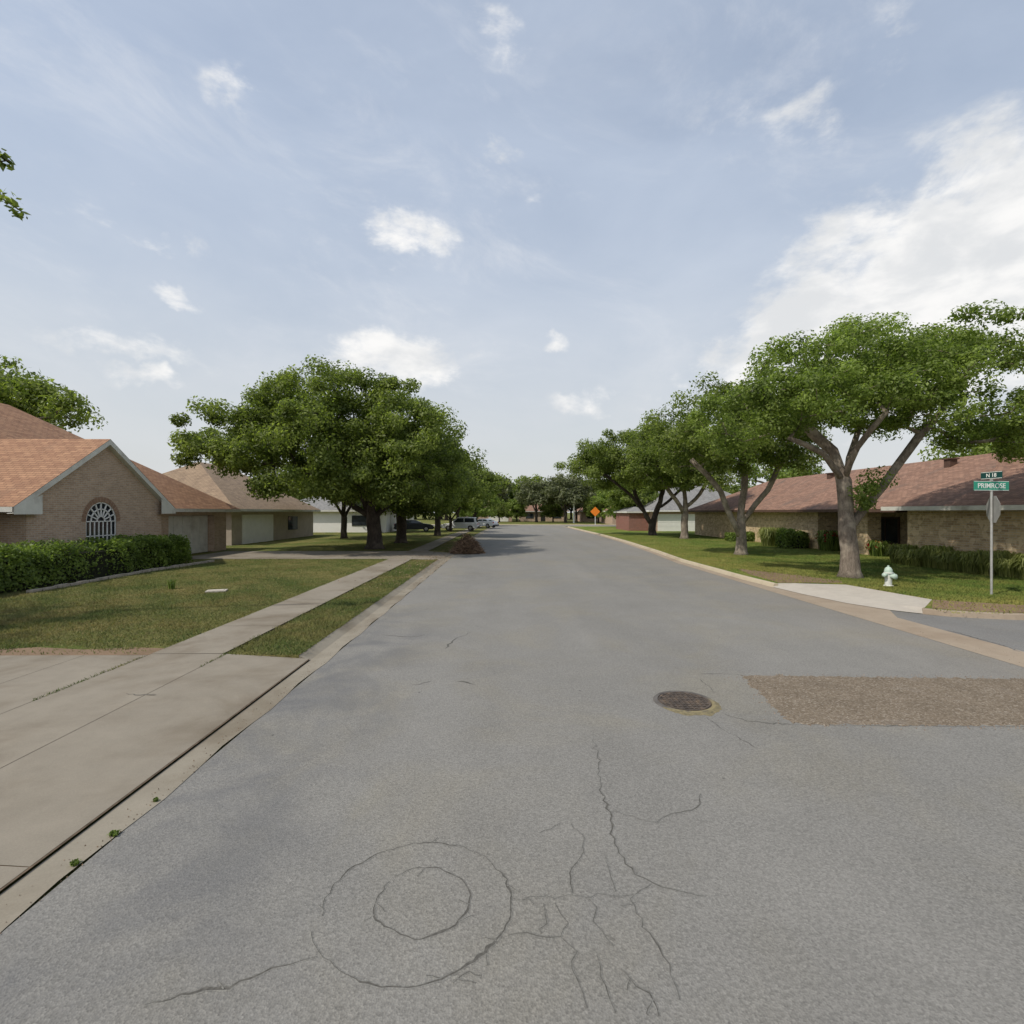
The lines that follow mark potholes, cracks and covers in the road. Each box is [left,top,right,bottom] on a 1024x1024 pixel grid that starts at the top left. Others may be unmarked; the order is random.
crack [144,714,1024,1016]
manhole cover [653,691,722,716]
